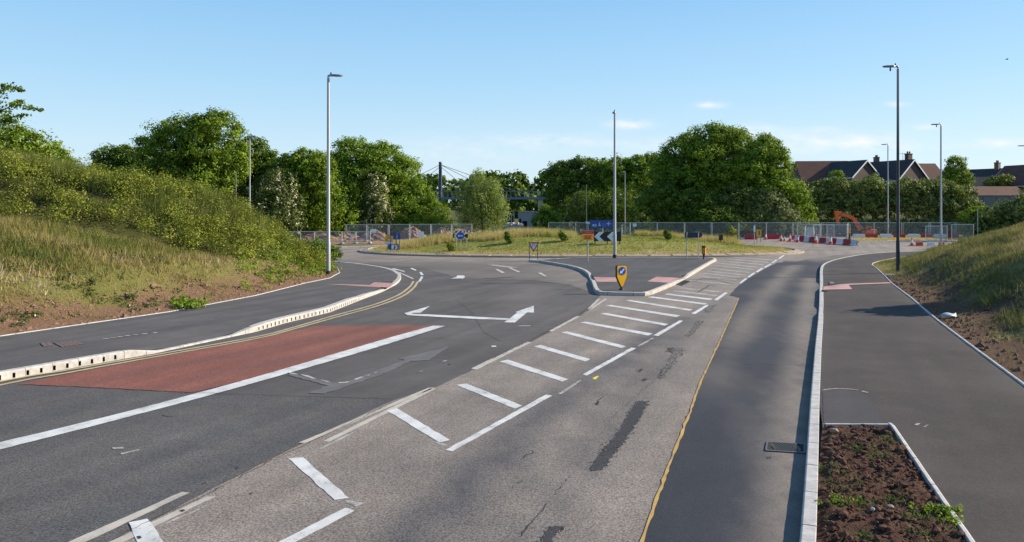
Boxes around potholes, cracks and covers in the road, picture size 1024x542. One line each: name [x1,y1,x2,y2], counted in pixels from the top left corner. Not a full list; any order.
crack [519,475,571,537]
drain grate [764,441,806,454]
